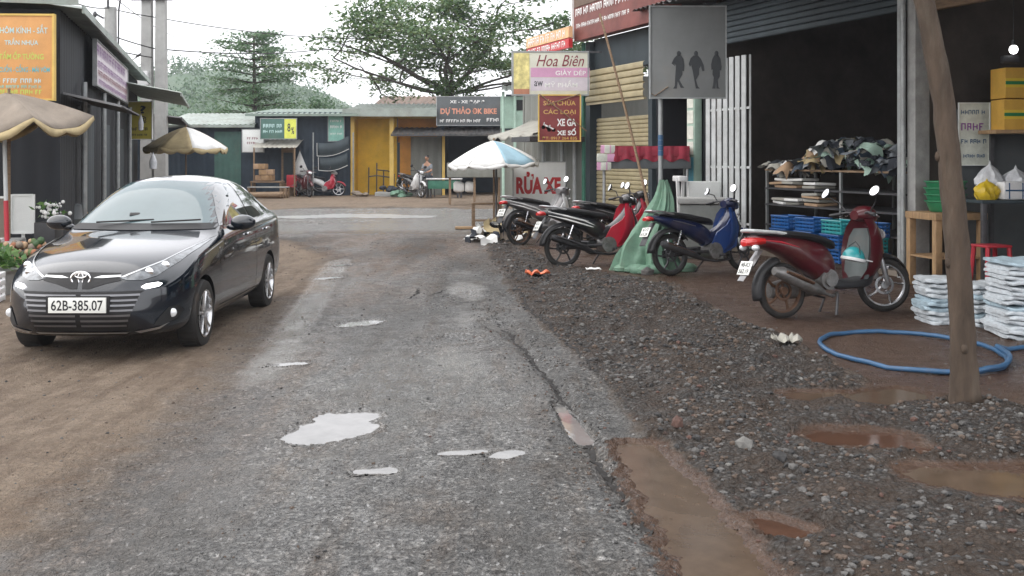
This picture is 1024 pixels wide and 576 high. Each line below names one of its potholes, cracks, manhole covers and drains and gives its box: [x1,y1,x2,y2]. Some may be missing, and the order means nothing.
pothole [768,383,945,405]
pothole [725,507,827,538]
pothole [604,431,806,576]
pothole [551,403,598,447]
pothole [485,446,531,460]
crack [491,285,680,576]
pothole [788,419,945,454]
pothole [332,318,388,328]
pothole [346,464,404,477]
pothole [271,407,389,447]
pothole [433,447,493,457]
pothole [884,449,1024,504]
